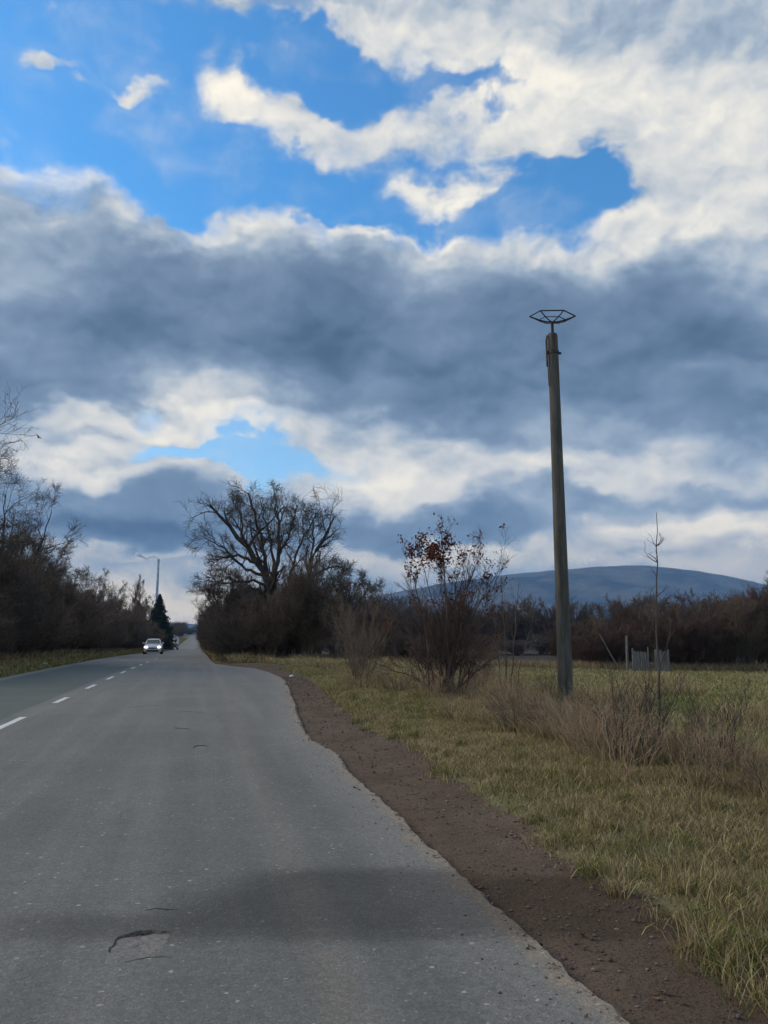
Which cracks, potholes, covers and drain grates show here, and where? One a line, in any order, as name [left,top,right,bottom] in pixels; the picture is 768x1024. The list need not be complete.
pothole [108,930,172,958]
